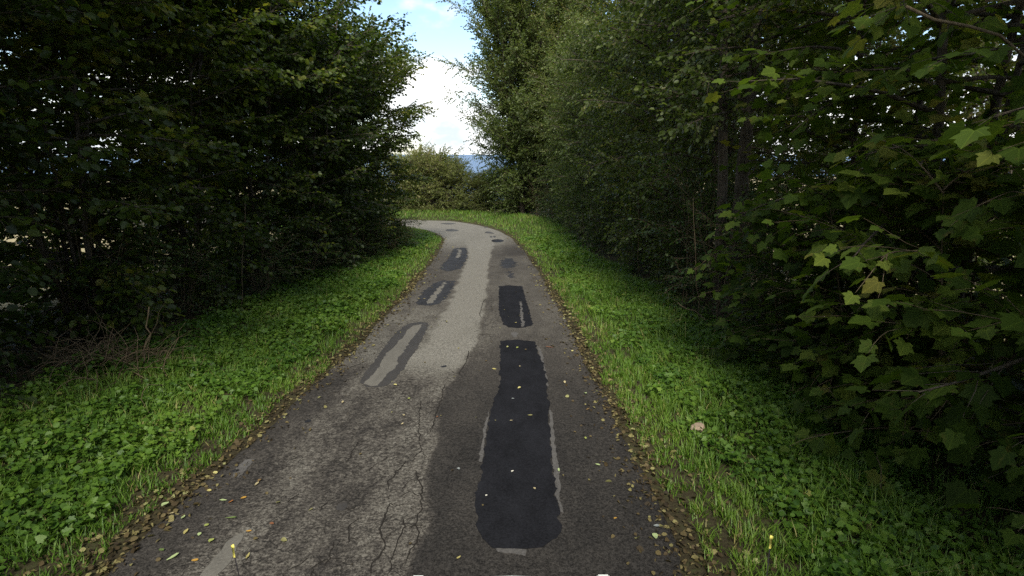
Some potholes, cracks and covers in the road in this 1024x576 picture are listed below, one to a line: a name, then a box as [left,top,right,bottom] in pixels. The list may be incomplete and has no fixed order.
crack [289,299,486,576]
